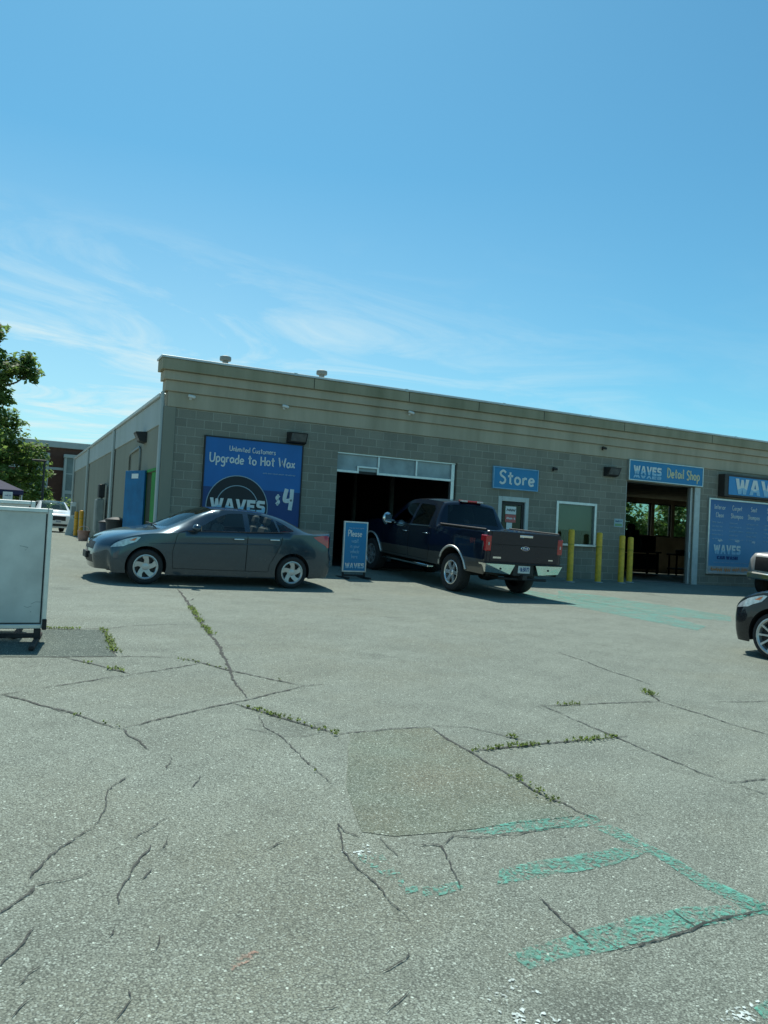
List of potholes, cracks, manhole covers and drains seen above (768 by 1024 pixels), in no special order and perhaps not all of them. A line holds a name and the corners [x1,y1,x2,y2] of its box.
crack [540,897,768,950]
crack [43,590,605,917]
crack [0,774,130,1017]
crack [544,652,661,706]
